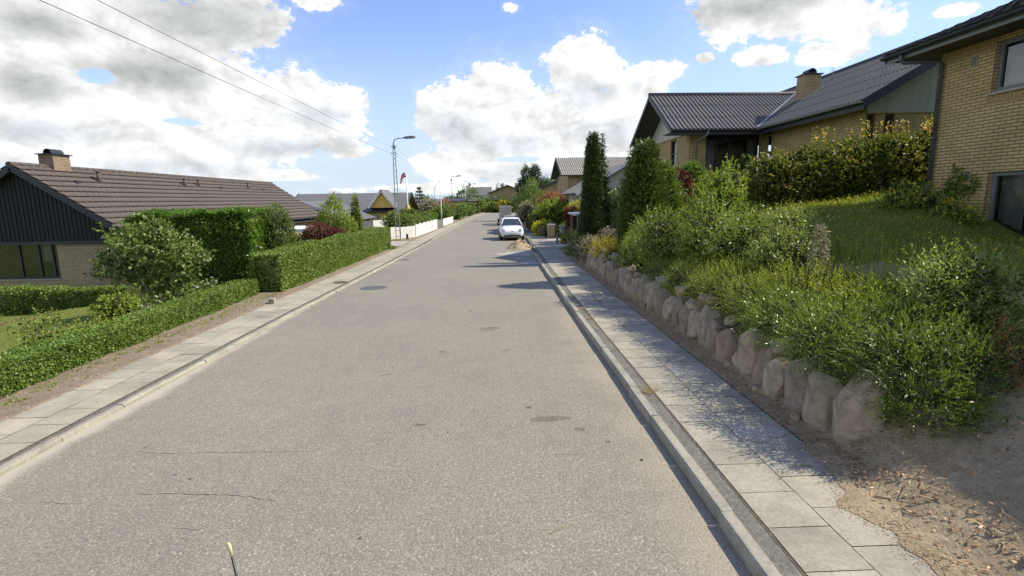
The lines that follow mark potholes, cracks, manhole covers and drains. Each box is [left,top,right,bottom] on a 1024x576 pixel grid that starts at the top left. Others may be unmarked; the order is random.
crack [143,493,276,502]
